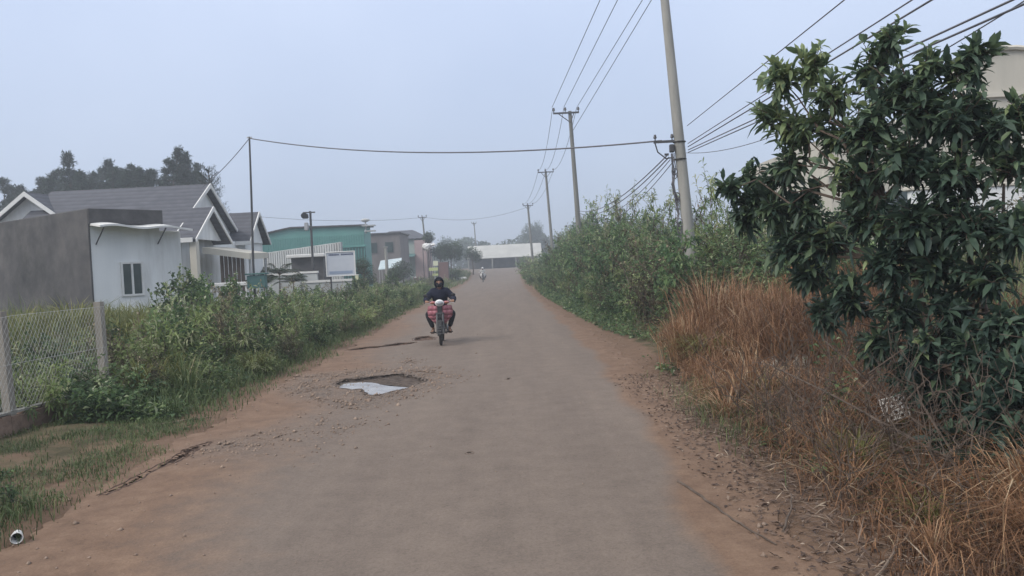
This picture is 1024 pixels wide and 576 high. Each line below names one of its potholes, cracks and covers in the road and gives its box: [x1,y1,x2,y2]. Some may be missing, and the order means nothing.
pothole [331,373,428,396]
crack [96,441,213,496]
